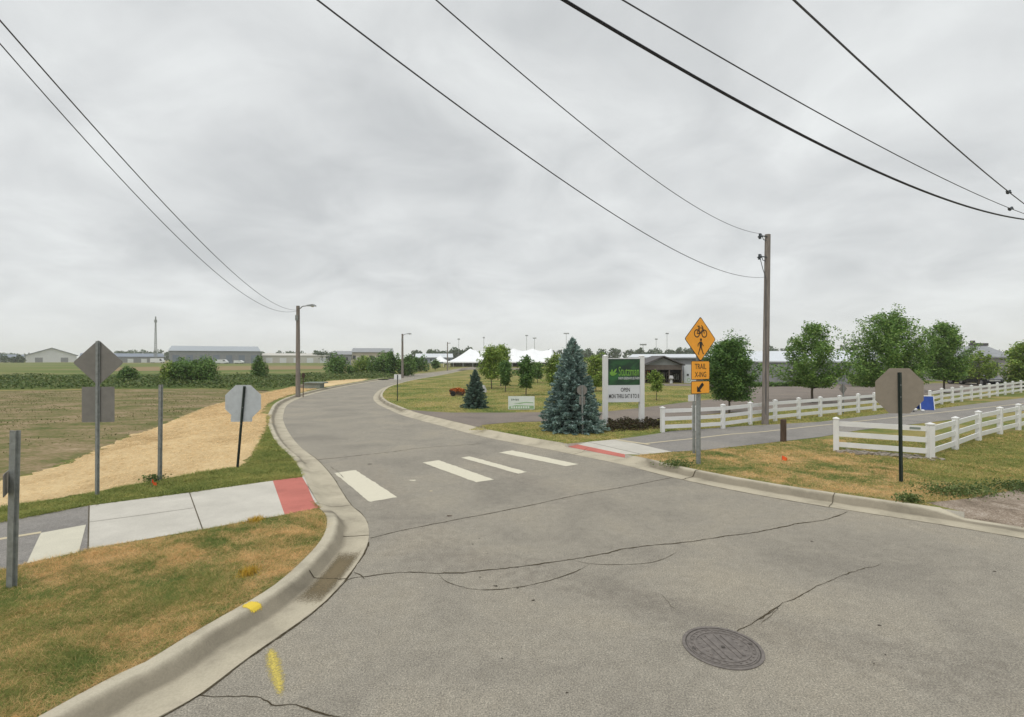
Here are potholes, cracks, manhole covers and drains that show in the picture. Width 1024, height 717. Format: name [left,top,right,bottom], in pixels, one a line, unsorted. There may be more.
manhole cover [682,626,765,671]
crack [372,477,672,538]
crack [201,695,340,717]
crack [309,512,846,590]
crack [737,561,888,631]
